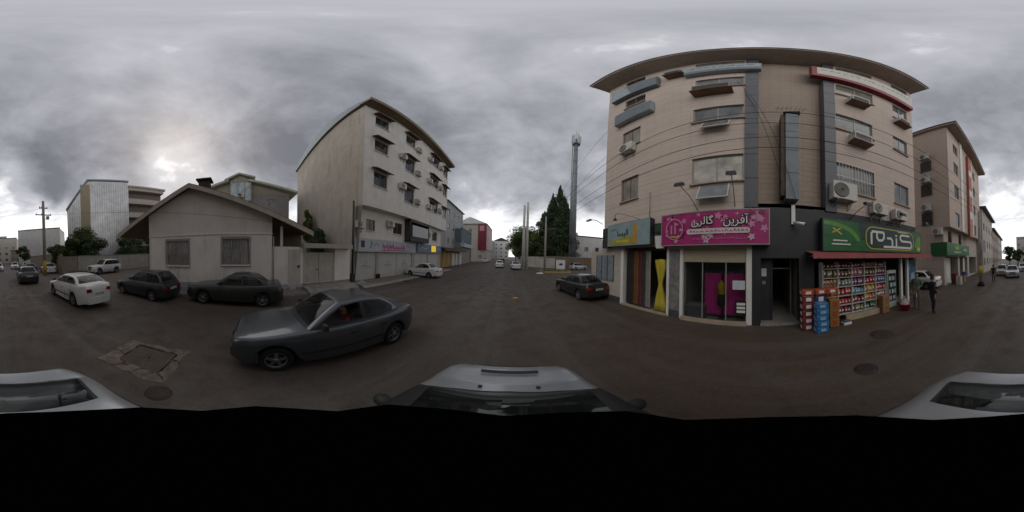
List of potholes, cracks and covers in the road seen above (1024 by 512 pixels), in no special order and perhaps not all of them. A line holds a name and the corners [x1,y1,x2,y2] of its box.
manhole cover [95,340,191,383]
manhole cover [853,363,879,375]
manhole cover [869,330,894,339]
manhole cover [144,386,173,401]
